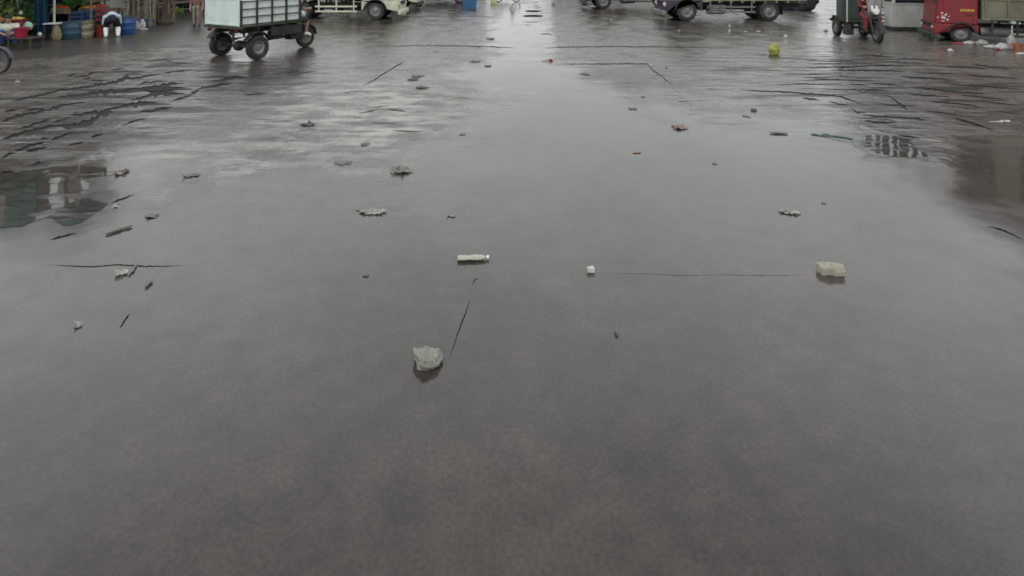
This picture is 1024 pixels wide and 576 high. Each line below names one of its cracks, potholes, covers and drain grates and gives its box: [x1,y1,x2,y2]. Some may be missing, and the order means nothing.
crack [988,226,1022,239]
crack [0,68,316,176]
crack [571,63,671,84]
crack [450,278,478,356]
crack [363,62,403,86]
